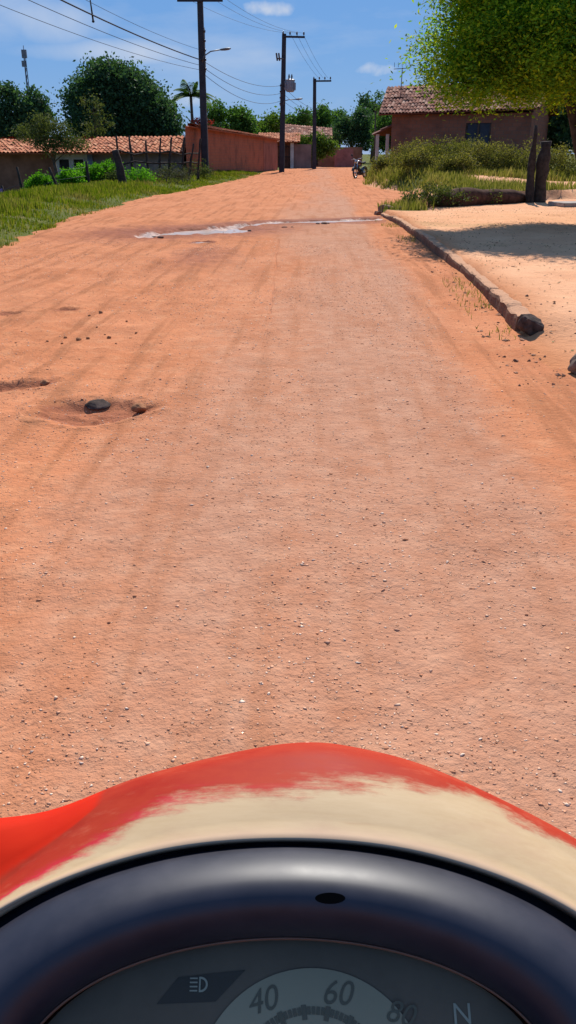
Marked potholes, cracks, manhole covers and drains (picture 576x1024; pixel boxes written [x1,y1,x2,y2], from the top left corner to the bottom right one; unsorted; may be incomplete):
pothole [0,376,67,393]
pothole [17,393,172,431]
pothole [132,225,286,238]
